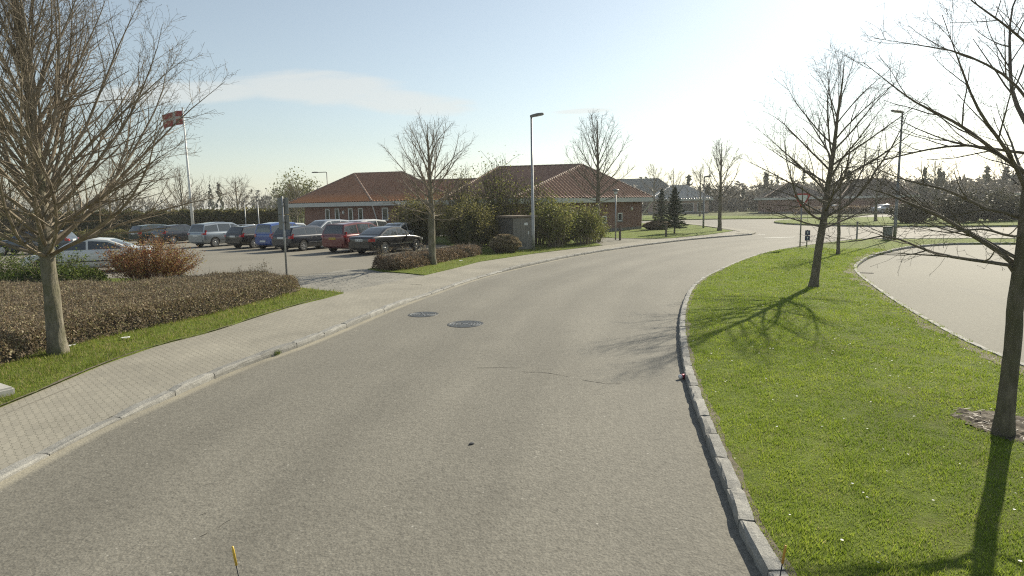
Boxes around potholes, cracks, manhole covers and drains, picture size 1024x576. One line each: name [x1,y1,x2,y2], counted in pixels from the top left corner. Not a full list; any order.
manhole cover [447,320,484,328]
